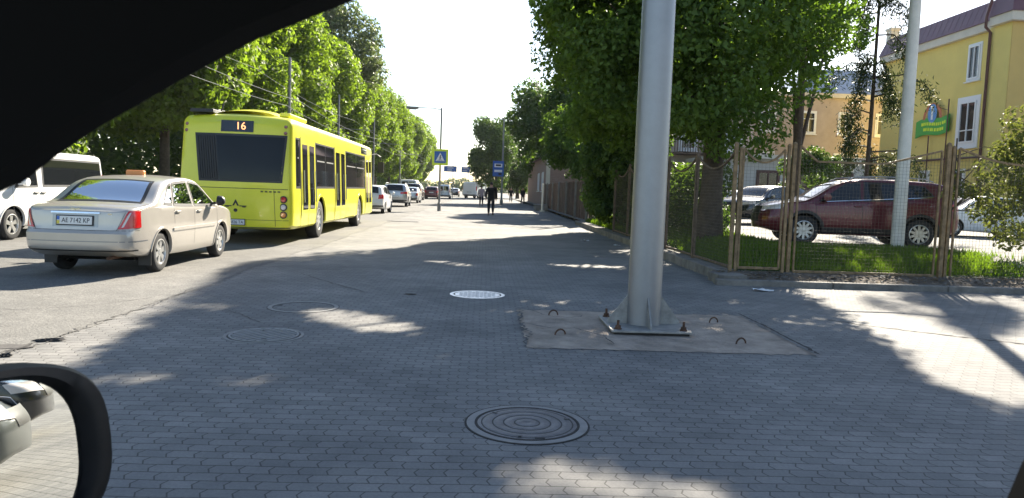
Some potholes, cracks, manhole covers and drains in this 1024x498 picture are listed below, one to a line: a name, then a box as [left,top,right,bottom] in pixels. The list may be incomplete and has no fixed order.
manhole cover [223,328,304,344]
manhole cover [450,291,505,299]
manhole cover [266,301,340,313]
manhole cover [464,405,590,445]
